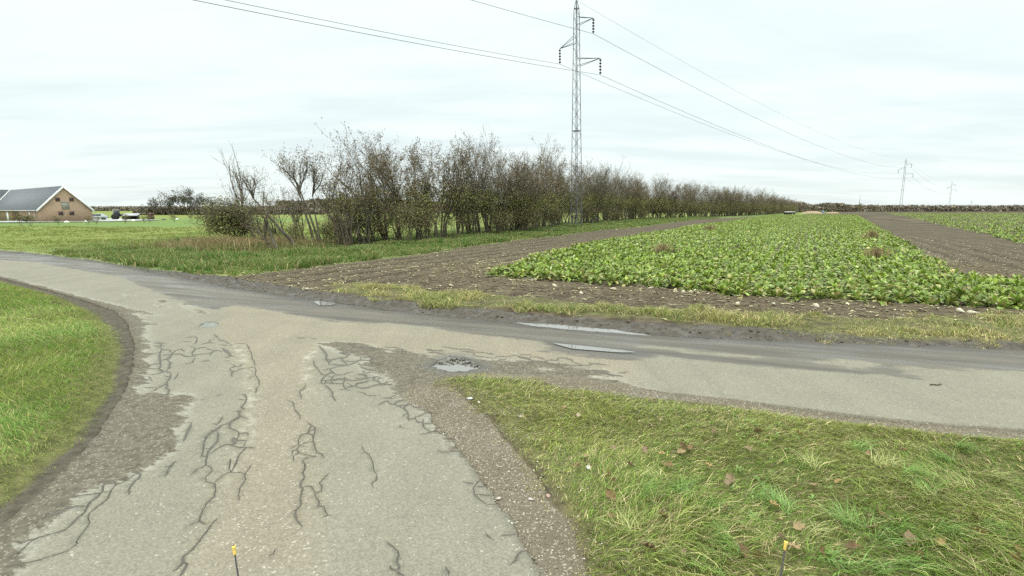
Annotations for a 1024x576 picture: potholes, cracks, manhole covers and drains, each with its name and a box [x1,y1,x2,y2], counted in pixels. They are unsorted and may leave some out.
crack [13,473,141,565]
crack [387,542,405,576]
pothole [431,355,483,369]
crack [146,334,260,576]
crack [288,337,461,527]
